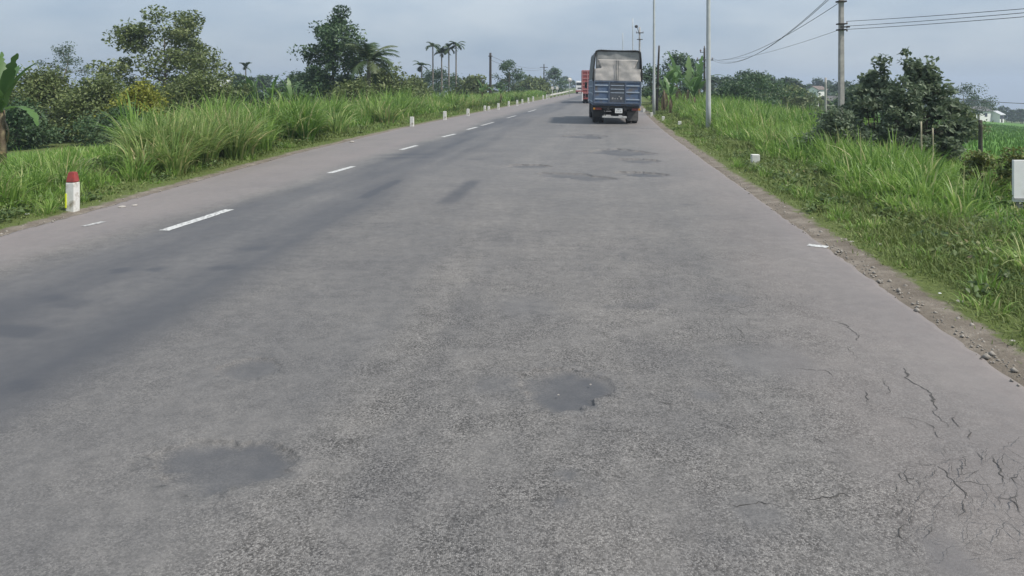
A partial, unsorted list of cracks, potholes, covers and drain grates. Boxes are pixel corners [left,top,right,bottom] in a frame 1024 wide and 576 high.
crack [794,367,1024,564]
